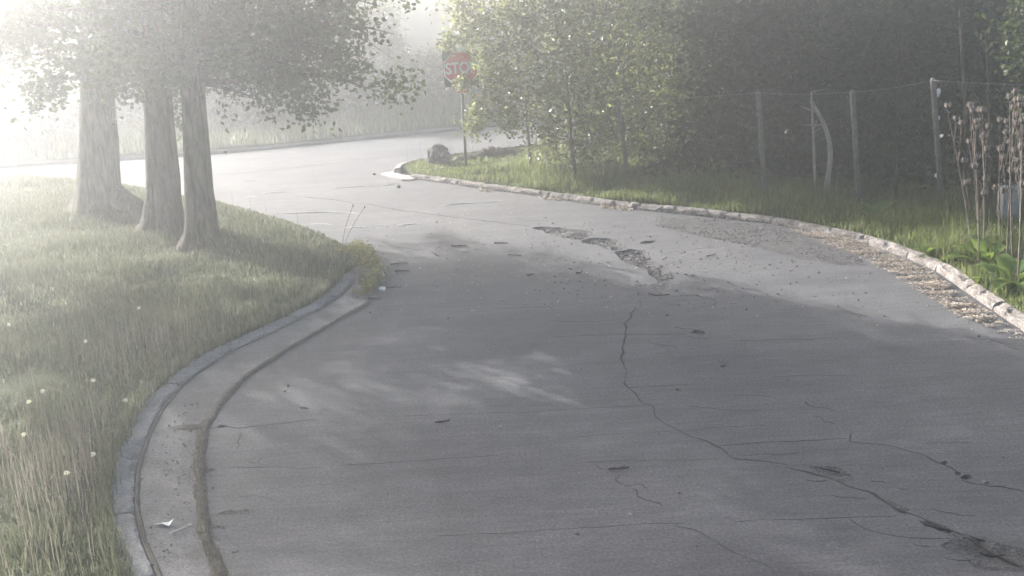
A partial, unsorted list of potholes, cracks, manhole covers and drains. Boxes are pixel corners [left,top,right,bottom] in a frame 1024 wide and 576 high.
crack [414,289,1024,567]
pothole [533,226,595,240]
crack [213,420,316,469]
pothole [615,249,674,281]
pothole [582,238,624,251]
